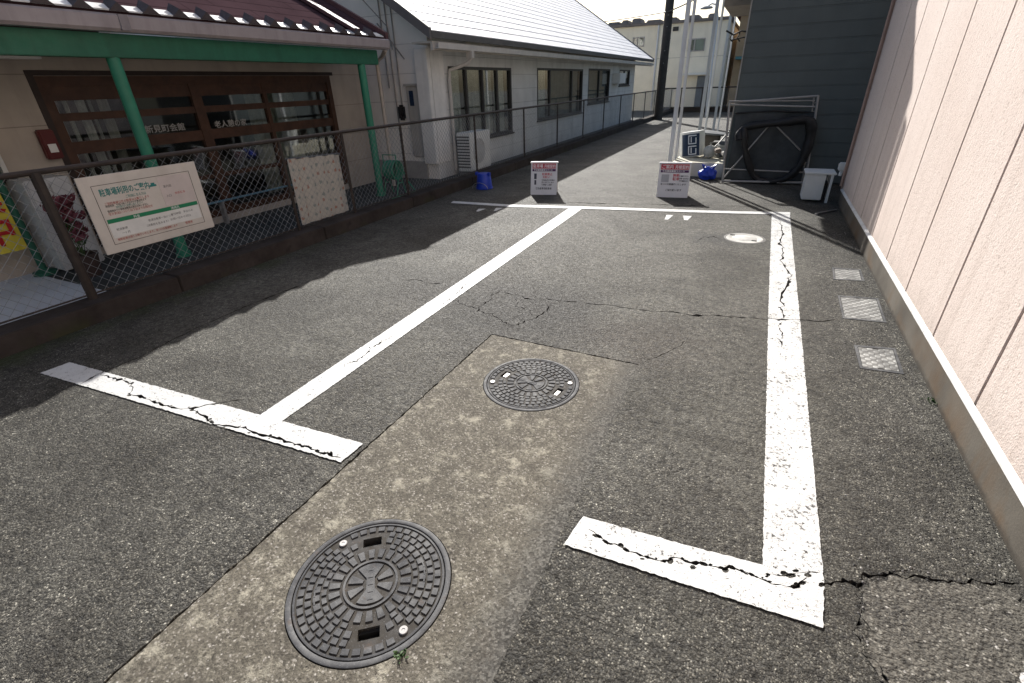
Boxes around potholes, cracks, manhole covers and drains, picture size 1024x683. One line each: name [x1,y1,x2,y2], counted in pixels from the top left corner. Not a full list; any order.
manhole cover [285,519,452,670]
crack [412,226,835,348]
manhole cover [483,358,579,412]
utility cover [832,267,865,281]
utility cover [838,295,887,323]
manhole cover [724,233,766,244]
crack [595,534,1019,683]
crack [107,376,333,457]
utility cover [854,345,904,375]
